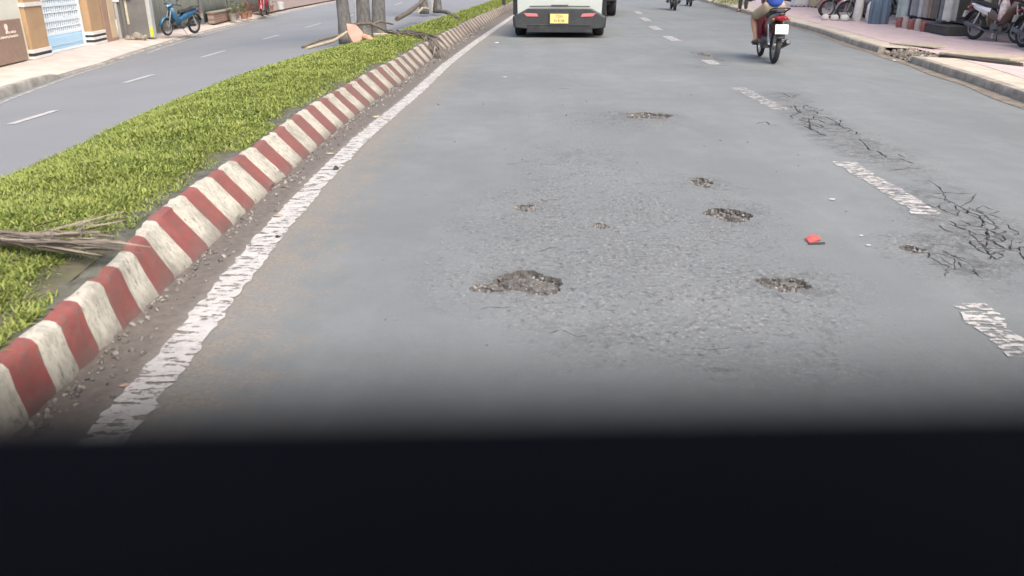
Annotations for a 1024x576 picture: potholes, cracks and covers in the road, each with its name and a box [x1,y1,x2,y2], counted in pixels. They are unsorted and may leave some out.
crack [915,180,1024,277]
pothole [487,270,563,295]
crack [785,94,915,172]
pothole [898,245,926,253]
pothole [703,208,753,223]
pothole [469,283,512,293]
pothole [754,278,813,292]
pothole [691,177,713,188]
pothole [513,204,536,212]
